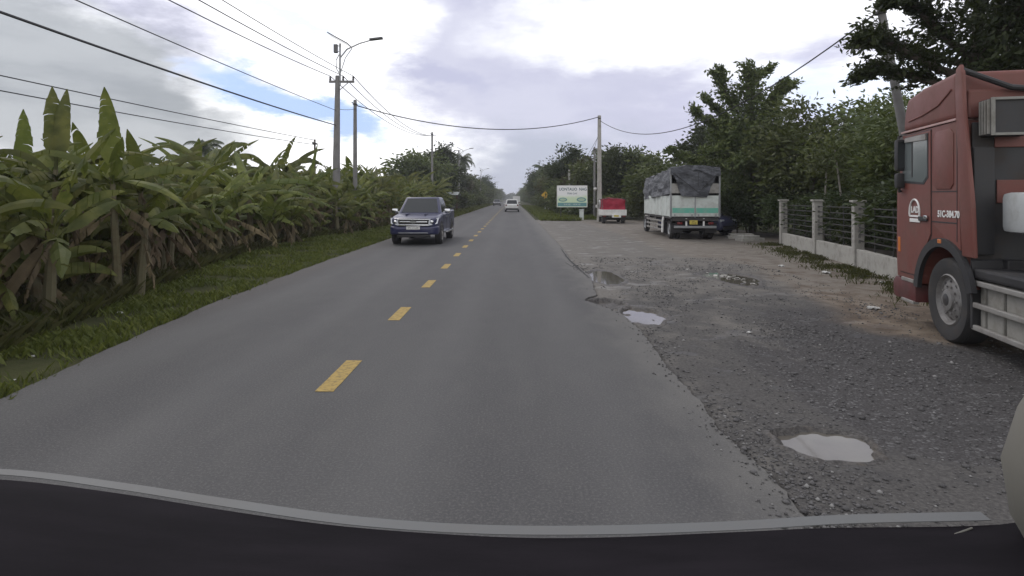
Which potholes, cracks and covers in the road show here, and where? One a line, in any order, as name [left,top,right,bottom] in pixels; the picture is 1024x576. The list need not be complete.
pothole [696,270,766,288]
pothole [618,305,674,327]
pothole [587,269,629,287]
pothole [762,425,890,466]
